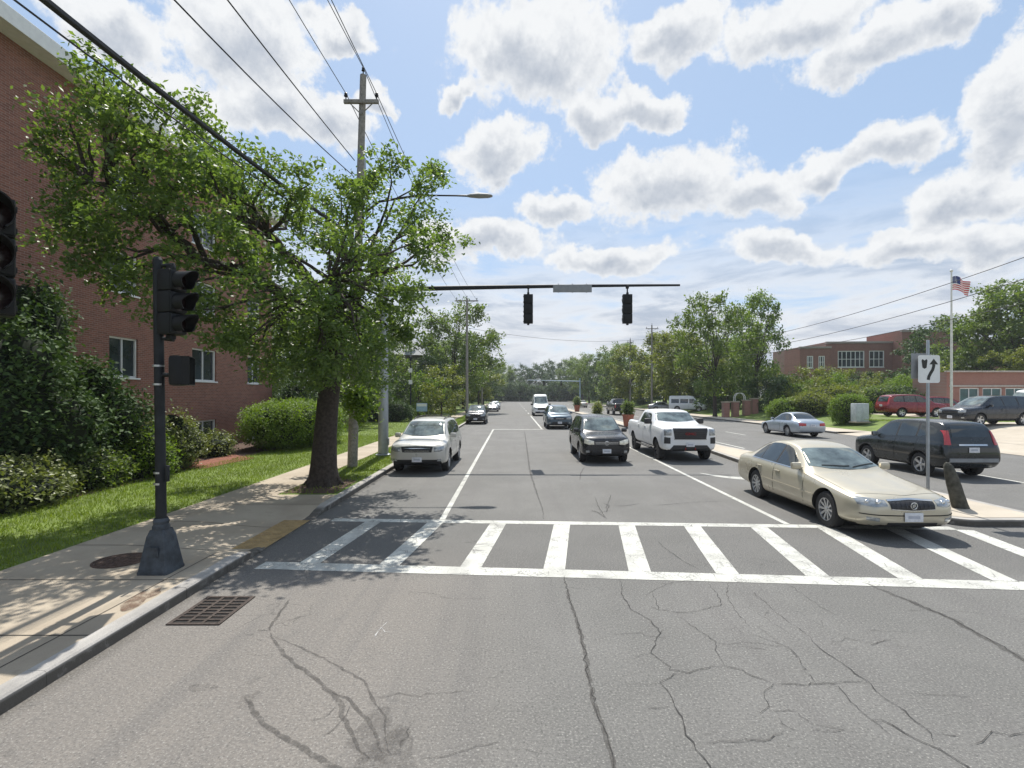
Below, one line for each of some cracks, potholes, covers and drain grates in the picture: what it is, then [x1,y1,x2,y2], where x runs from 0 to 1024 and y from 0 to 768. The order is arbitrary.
manhole cover [90,552,142,569]
crack [620,579,1024,768]
drain grate [166,596,255,625]
